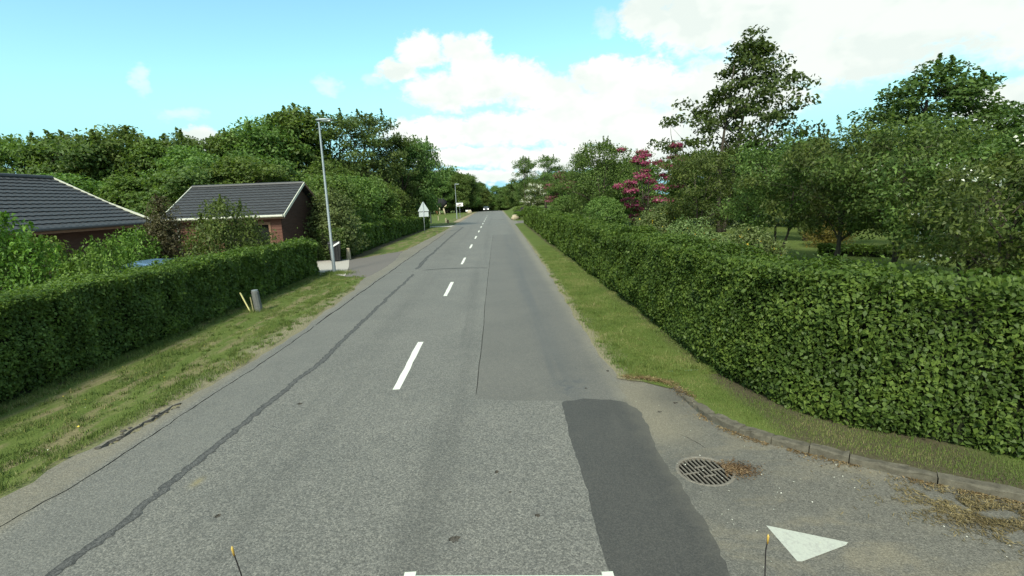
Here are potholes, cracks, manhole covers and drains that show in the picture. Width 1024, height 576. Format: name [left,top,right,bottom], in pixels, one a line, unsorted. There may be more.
drain grate [675,456,736,487]
crack [0,233,445,576]
